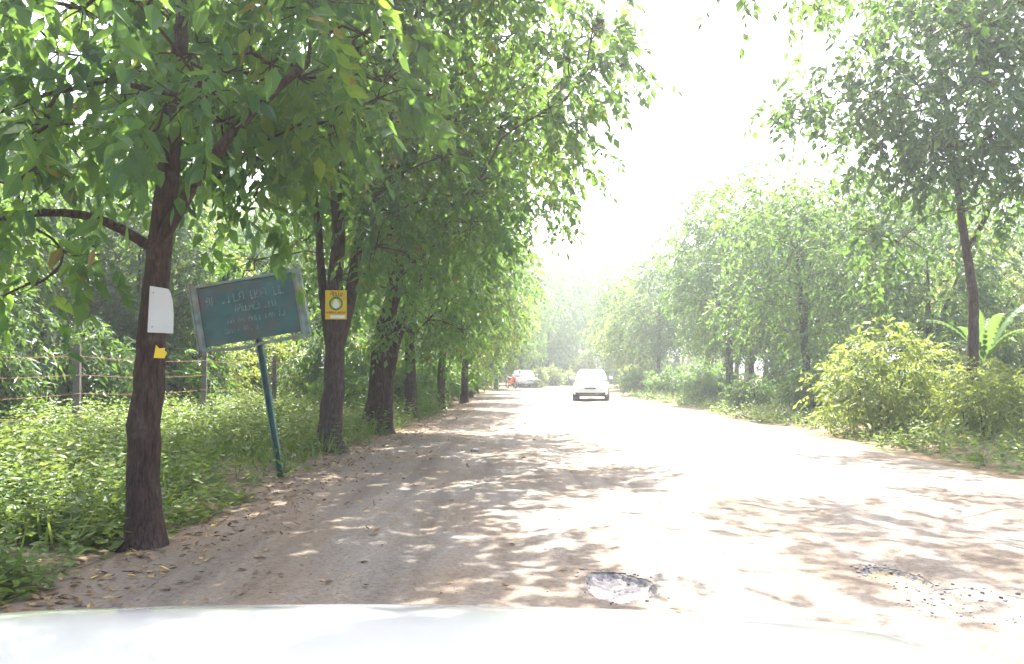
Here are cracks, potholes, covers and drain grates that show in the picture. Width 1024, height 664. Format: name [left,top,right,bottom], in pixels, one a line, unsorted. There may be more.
pothole [575,565,670,609]
pothole [896,583,1024,626]
pothole [849,563,942,591]
